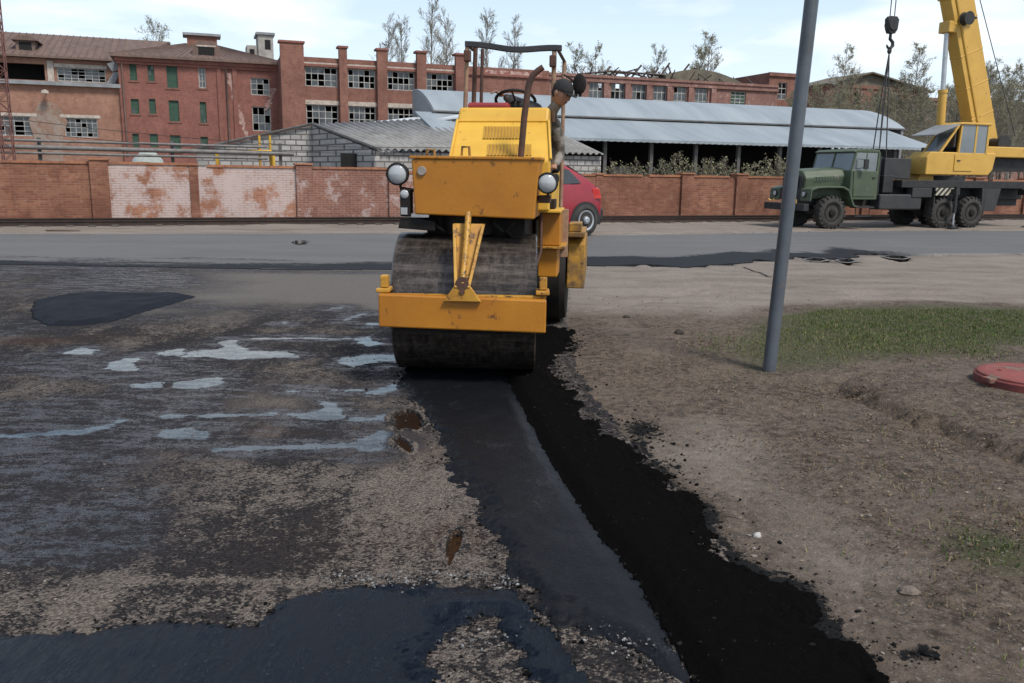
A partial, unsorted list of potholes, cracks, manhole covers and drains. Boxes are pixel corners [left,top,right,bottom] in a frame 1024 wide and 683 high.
manhole cover [972,362,1024,393]
pothole [384,407,431,433]
pothole [387,433,419,456]
